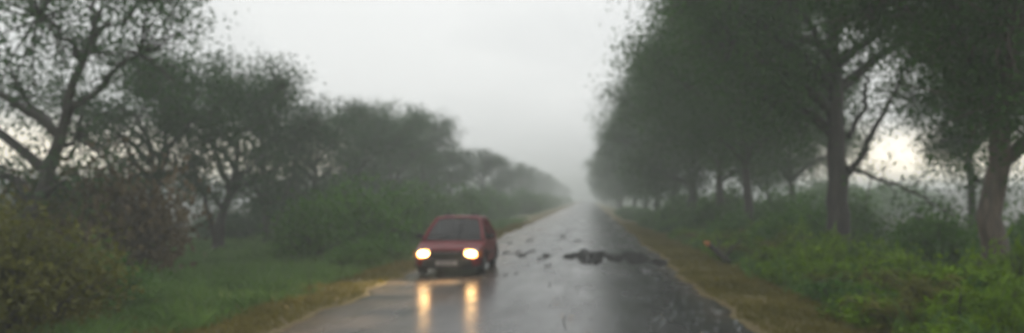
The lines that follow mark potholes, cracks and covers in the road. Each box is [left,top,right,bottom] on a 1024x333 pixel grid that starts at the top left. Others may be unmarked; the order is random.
pothole [576,248,591,265]
pothole [604,254,625,263]
pothole [589,251,608,263]
pothole [621,252,649,265]
